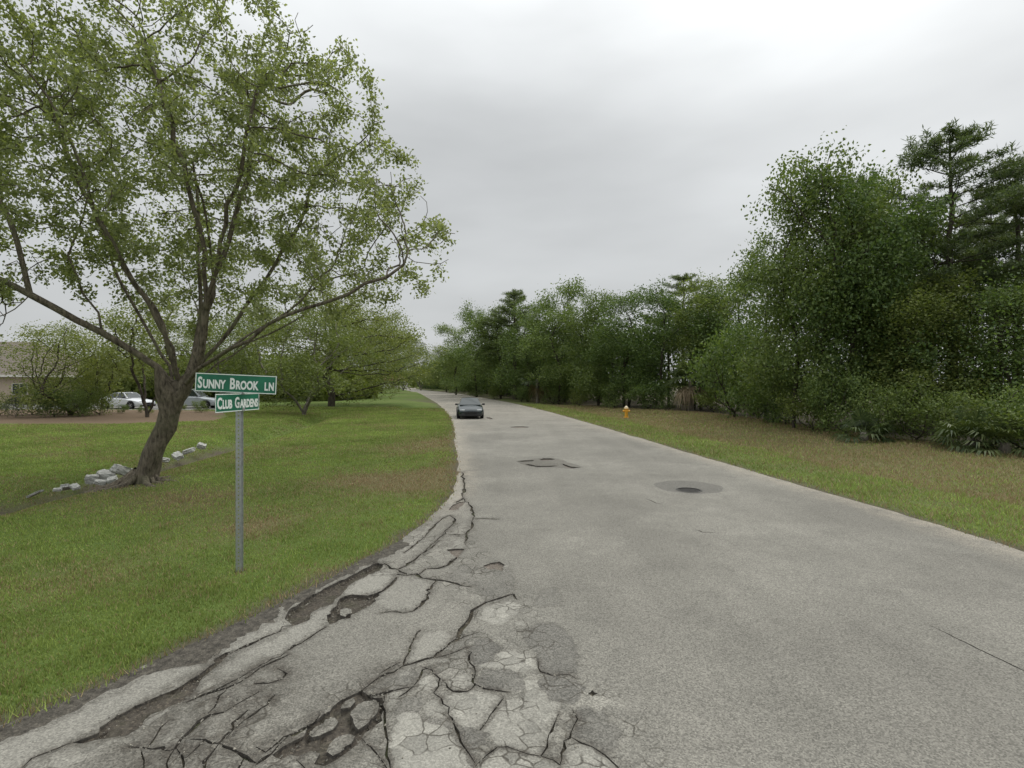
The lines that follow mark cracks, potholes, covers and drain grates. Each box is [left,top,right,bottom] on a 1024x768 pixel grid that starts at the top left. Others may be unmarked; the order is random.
crack [930,625,1024,671]
pothole [285,563,384,626]
pothole [484,562,504,571]
crack [128,472,619,768]
